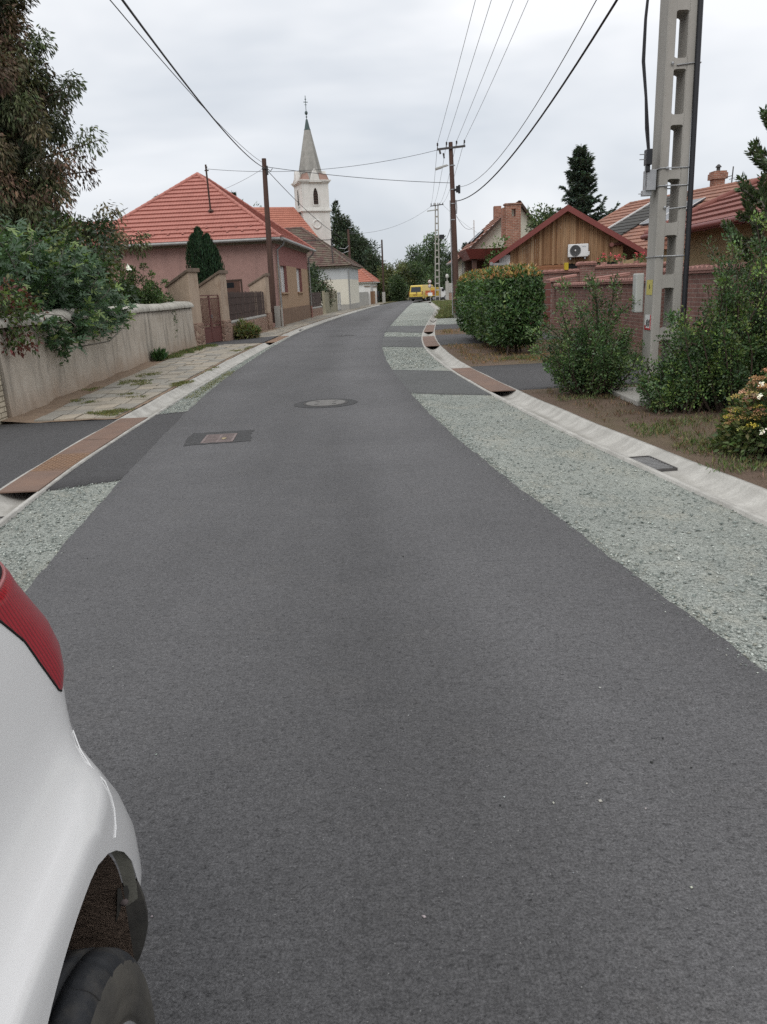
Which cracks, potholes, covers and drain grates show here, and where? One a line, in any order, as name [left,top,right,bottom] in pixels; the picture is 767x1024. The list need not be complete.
manhole cover [294,398,357,408]
drain grate [630,455,678,472]
